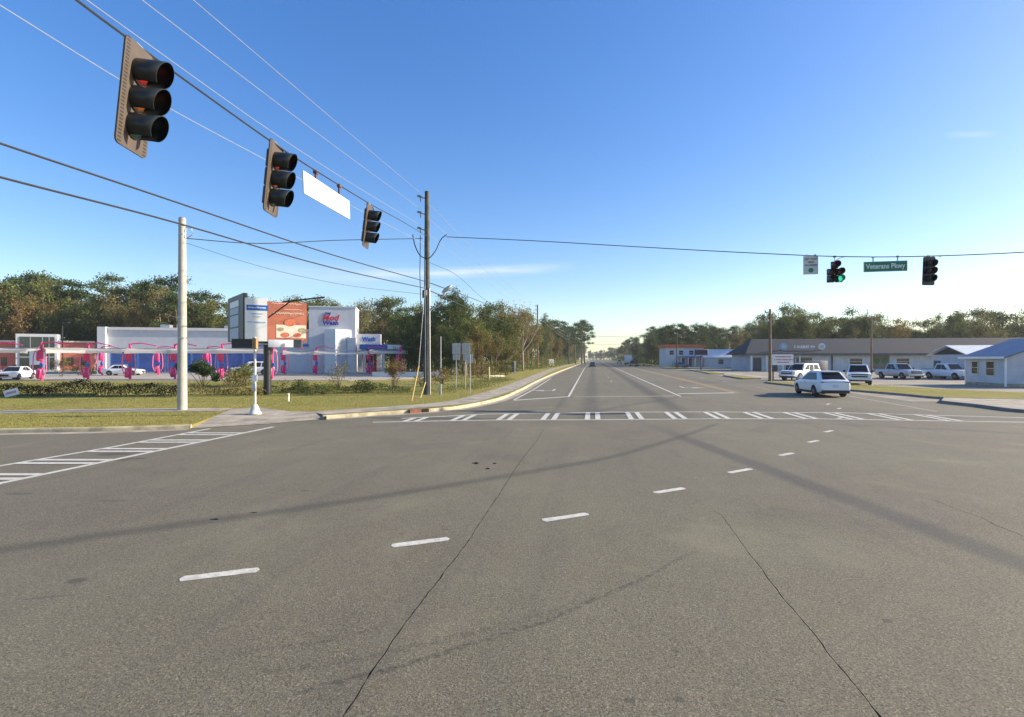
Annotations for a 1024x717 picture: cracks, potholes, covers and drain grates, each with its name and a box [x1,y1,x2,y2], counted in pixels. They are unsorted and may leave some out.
crack [716,512,881,717]
crack [342,429,544,717]
